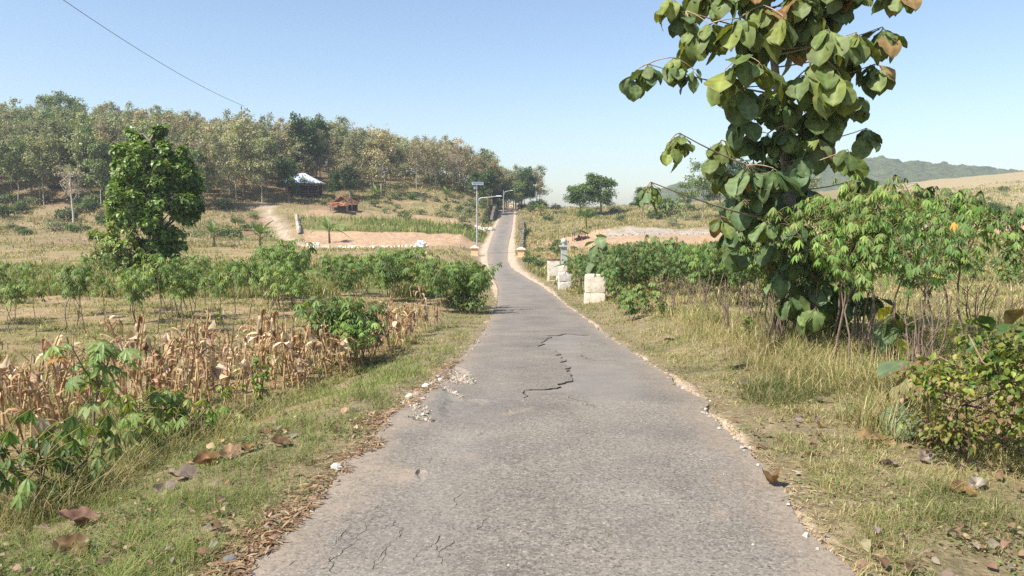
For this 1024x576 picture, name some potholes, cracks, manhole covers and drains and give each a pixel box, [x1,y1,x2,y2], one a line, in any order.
pothole [415,469,429,481]
crack [291,457,486,573]
pothole [428,389,499,420]
crack [523,334,602,407]
pothole [440,366,473,385]
